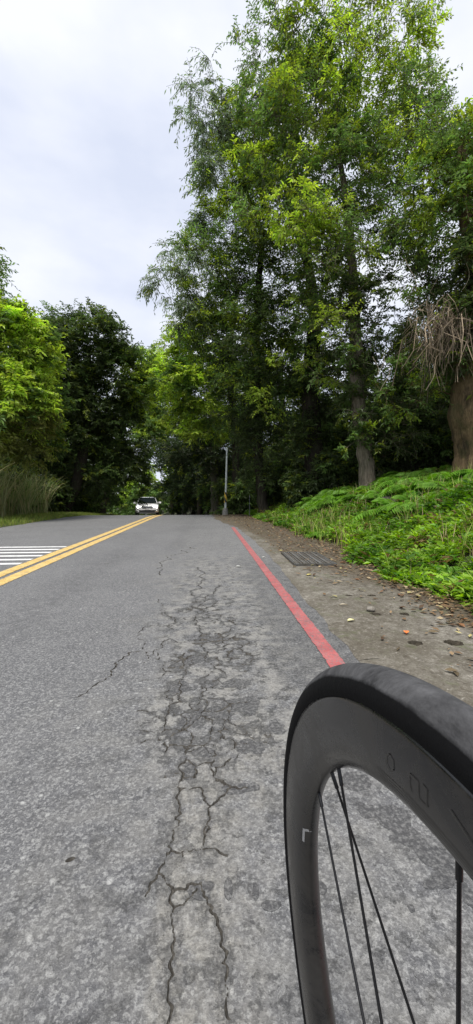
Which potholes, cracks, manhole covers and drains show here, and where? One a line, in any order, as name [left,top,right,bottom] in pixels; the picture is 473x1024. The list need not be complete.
drain grate [281,552,337,566]
crack [137,567,272,1024]
crack [77,651,139,698]
